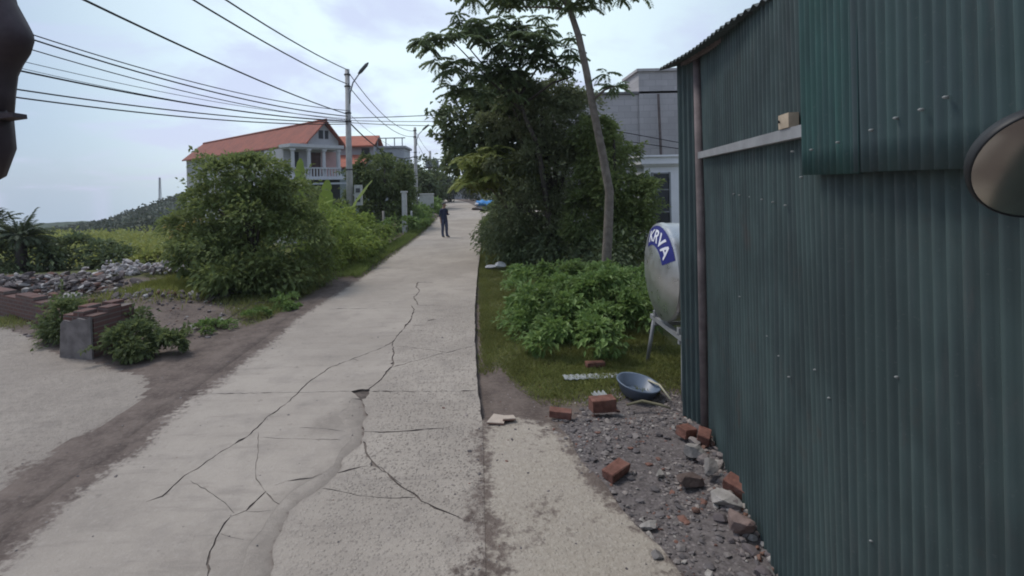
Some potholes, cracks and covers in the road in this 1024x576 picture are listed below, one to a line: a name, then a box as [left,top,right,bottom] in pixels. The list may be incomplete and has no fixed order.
pothole [352,389,370,401]
crack [146,282,471,576]
